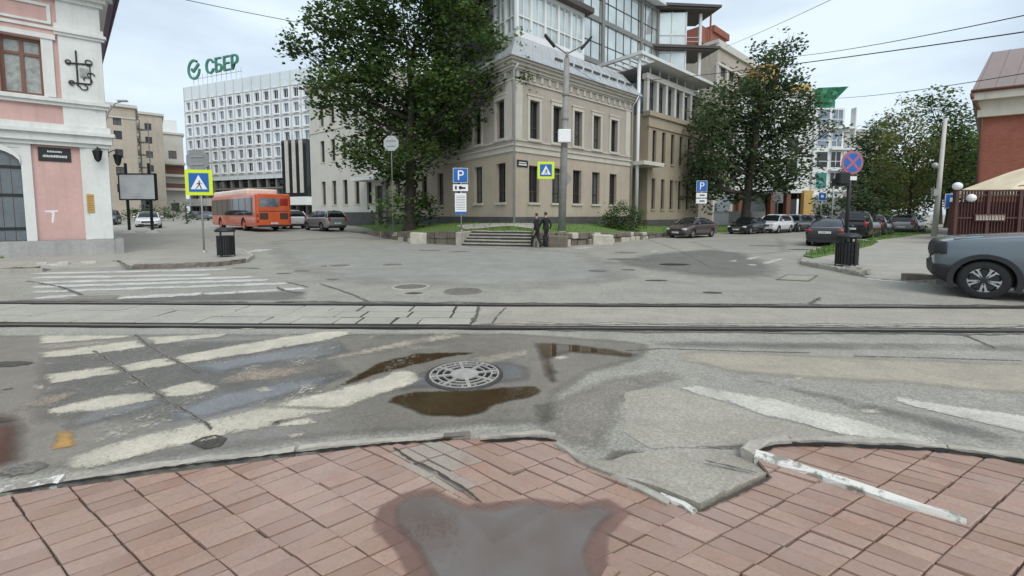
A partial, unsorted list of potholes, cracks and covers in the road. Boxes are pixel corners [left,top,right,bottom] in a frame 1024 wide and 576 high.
drain grate [425,361,503,391]
